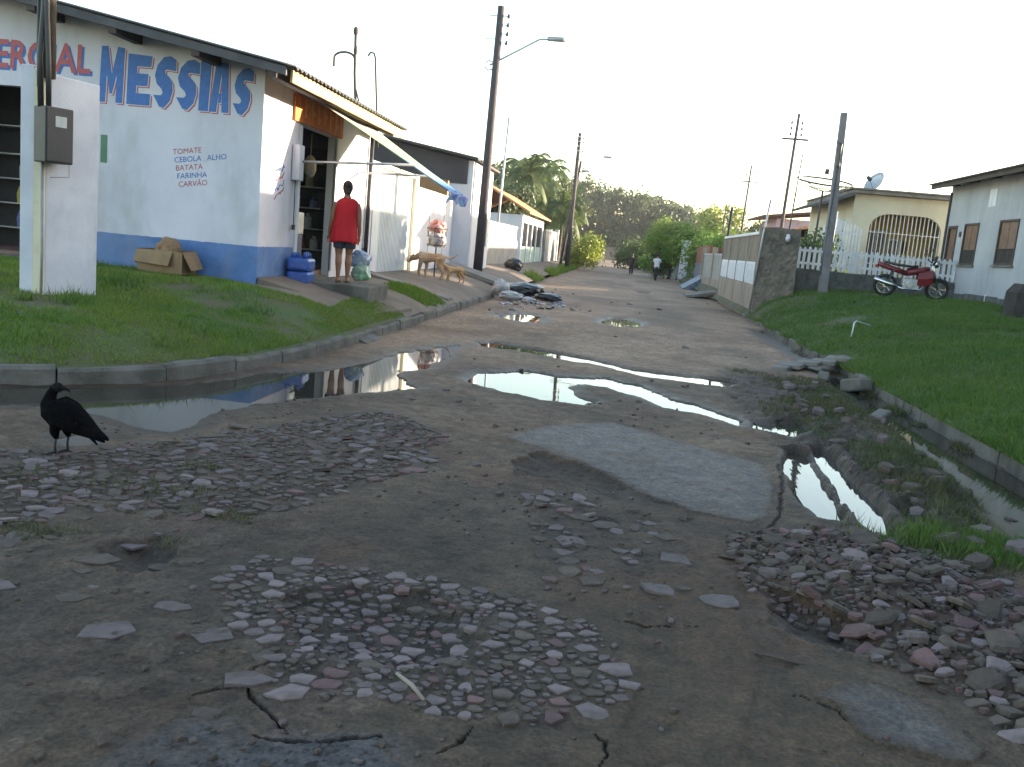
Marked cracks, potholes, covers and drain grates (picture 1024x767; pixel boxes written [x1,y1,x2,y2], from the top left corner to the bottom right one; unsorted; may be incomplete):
pothole [98,536,184,574]
pothole [768,586,883,655]
crack [595,733,611,767]
pothole [478,341,741,384]
crack [437,726,475,754]
crack [194,661,383,744]
pothole [470,369,812,430]
pothole [89,344,462,423]
pothole [494,311,548,322]
pothole [282,585,487,670]
